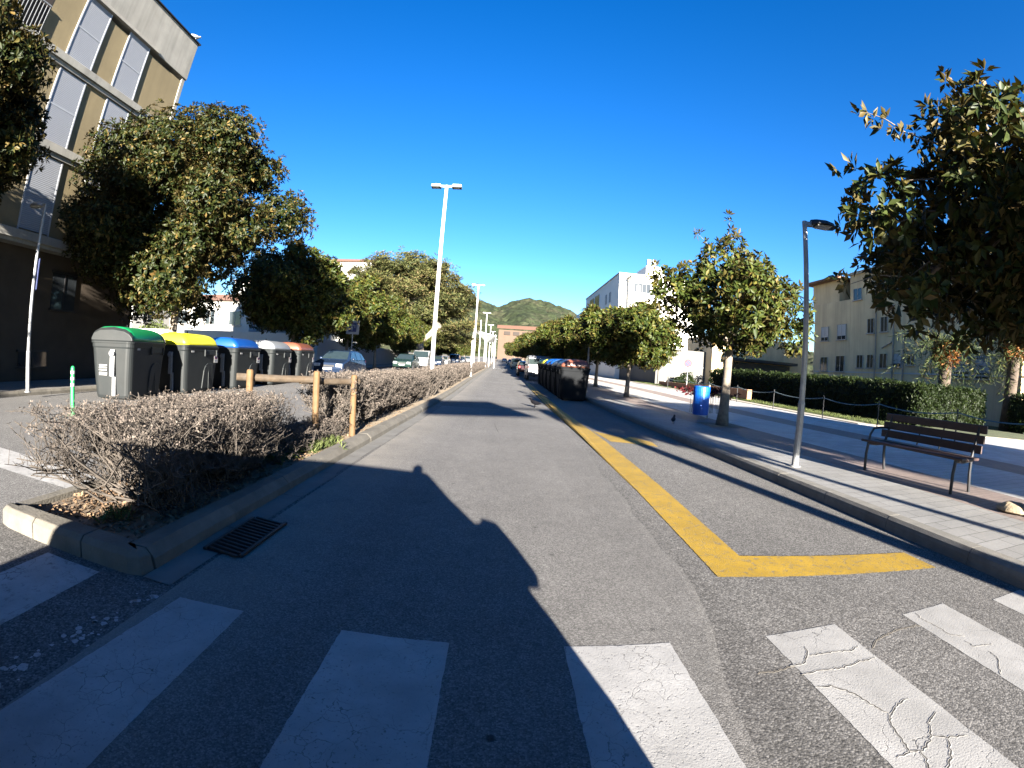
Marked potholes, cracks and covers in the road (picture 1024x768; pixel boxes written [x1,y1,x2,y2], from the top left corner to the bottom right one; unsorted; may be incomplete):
drain grate [203,516,287,558]
crack [757,613,1001,768]
